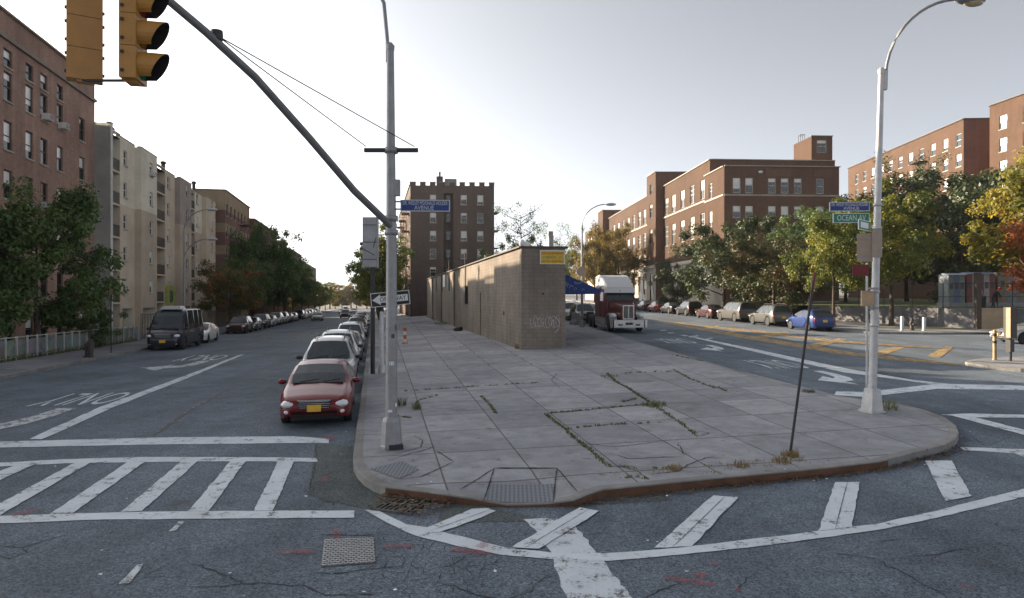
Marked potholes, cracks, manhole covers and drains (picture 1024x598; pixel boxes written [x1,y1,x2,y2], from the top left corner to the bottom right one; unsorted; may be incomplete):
manhole cover [321,537,375,567]
crack [829,540,974,597]
drain grate [370,495,432,515]
crack [140,534,498,598]
crack [1,534,68,559]
